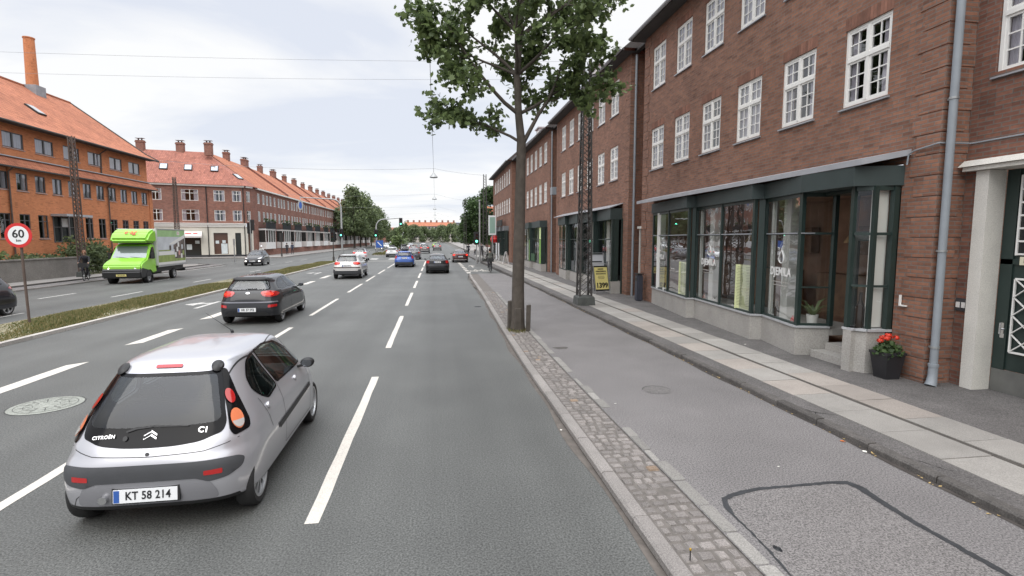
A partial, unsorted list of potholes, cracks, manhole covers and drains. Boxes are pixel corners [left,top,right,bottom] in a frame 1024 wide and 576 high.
manhole cover [642,386,671,394]
manhole cover [3,396,87,416]
